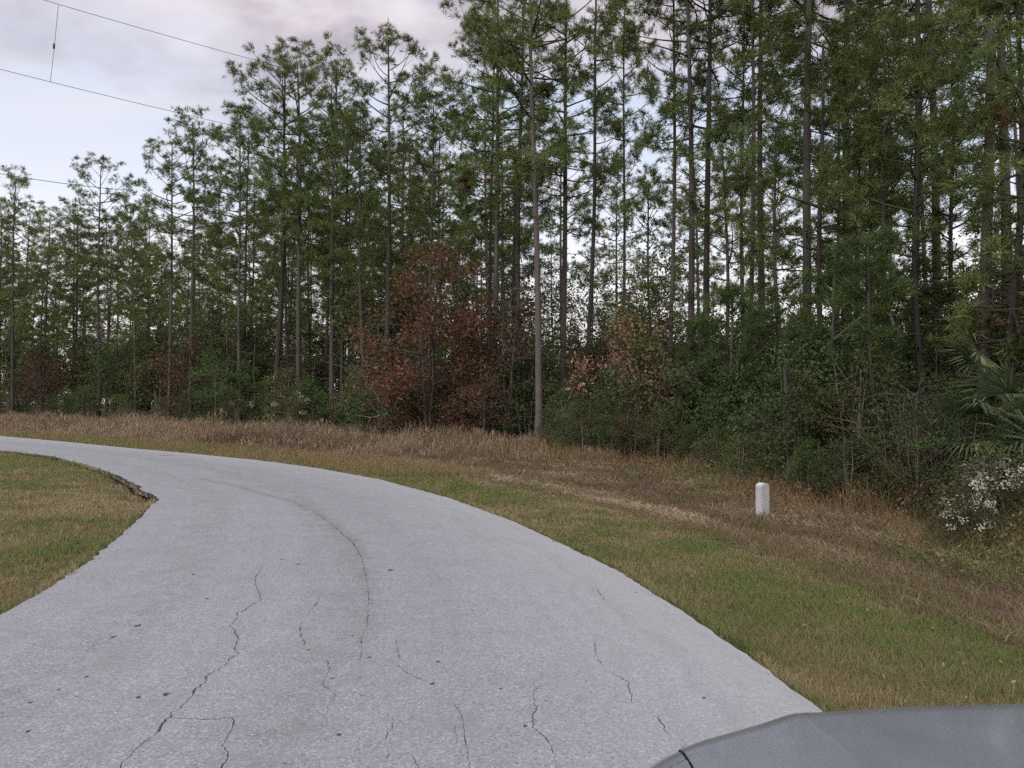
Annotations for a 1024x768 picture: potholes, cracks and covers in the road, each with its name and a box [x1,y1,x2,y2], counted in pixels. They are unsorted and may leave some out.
crack [531,683,557,768]
crack [120,566,263,768]
crack [453,703,470,768]
crack [593,640,633,702]
crack [204,479,370,659]
